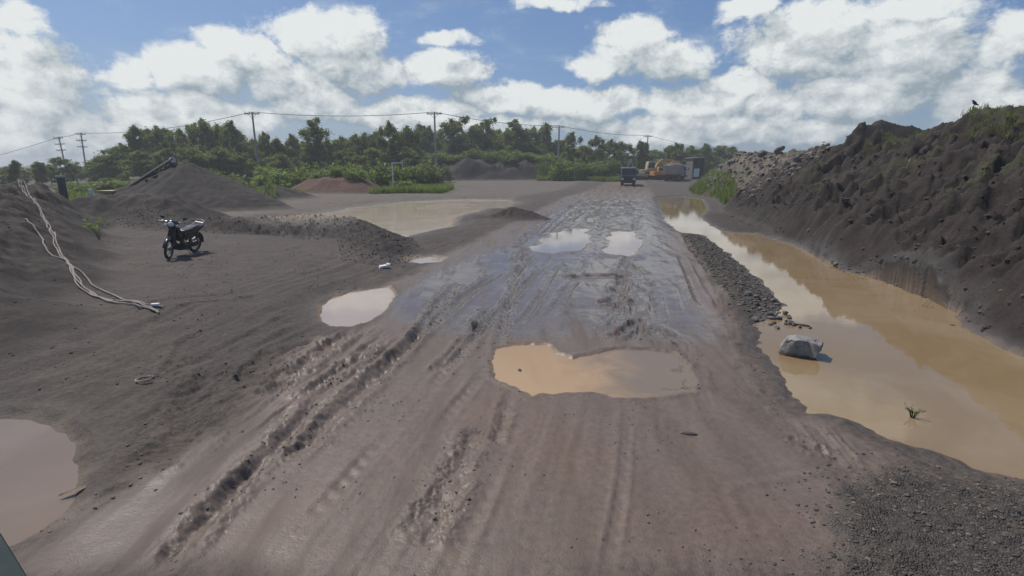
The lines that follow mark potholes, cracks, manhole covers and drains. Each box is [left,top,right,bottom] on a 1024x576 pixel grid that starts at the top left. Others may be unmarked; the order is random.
pothole [0,404,106,547]
pothole [599,230,646,256]
pothole [401,253,450,263]
pothole [314,284,398,327]
pothole [487,341,699,399]
pothole [524,227,598,255]
